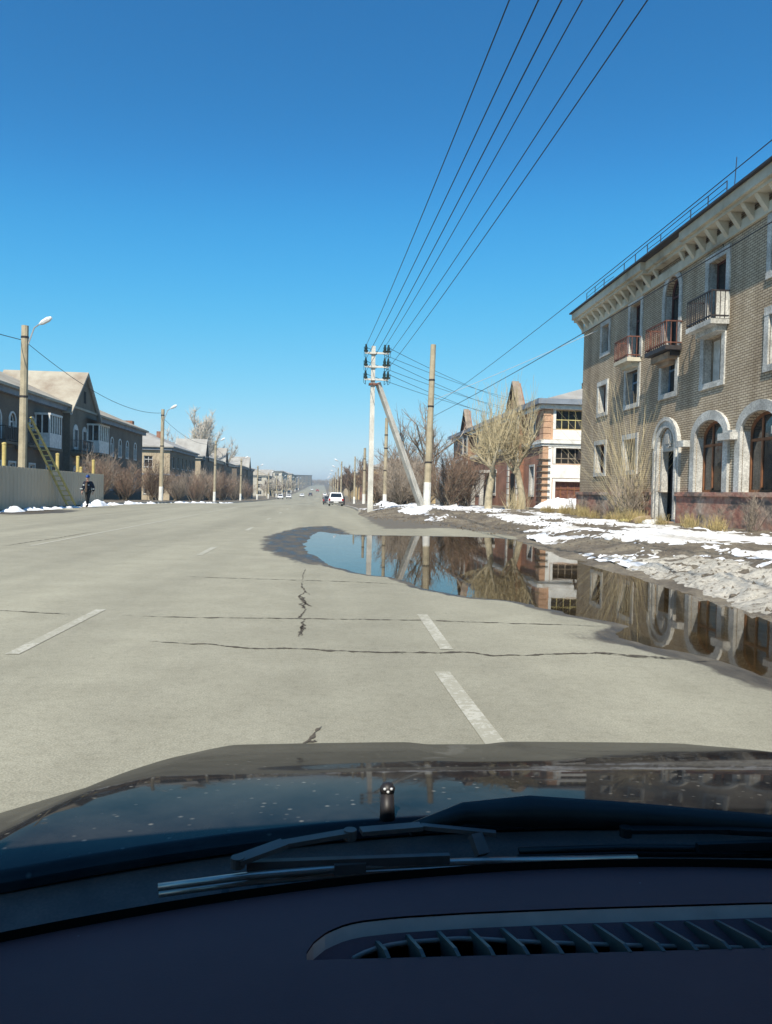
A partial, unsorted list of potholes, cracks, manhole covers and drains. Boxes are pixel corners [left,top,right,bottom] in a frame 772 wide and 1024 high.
crack [122,573,728,661]
crack [303,726,322,743]
